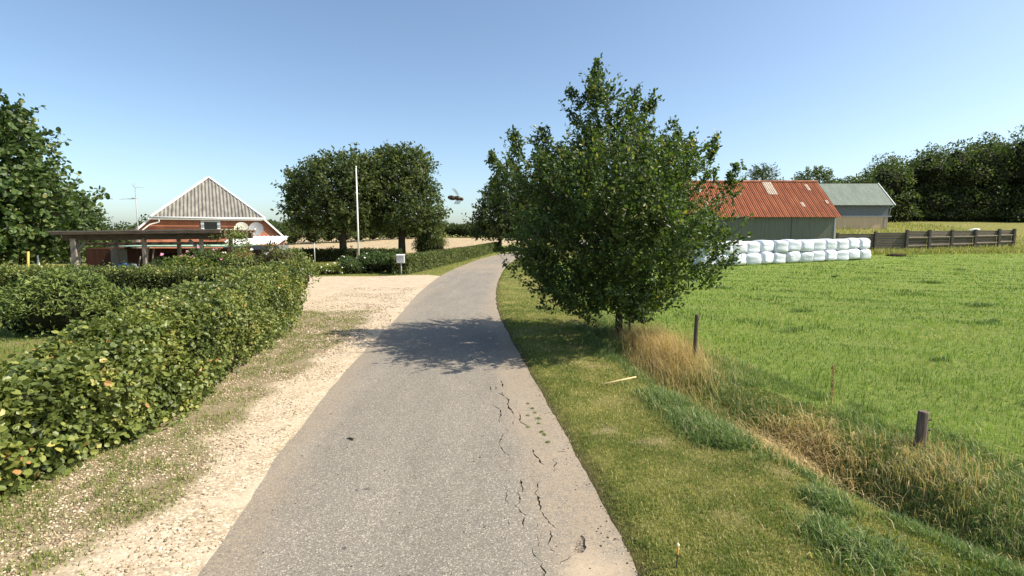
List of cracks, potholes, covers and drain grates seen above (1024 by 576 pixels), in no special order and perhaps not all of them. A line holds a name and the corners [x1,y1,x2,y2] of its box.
crack [490,381,527,455]
crack [504,479,573,576]
pothole [574,535,586,553]
